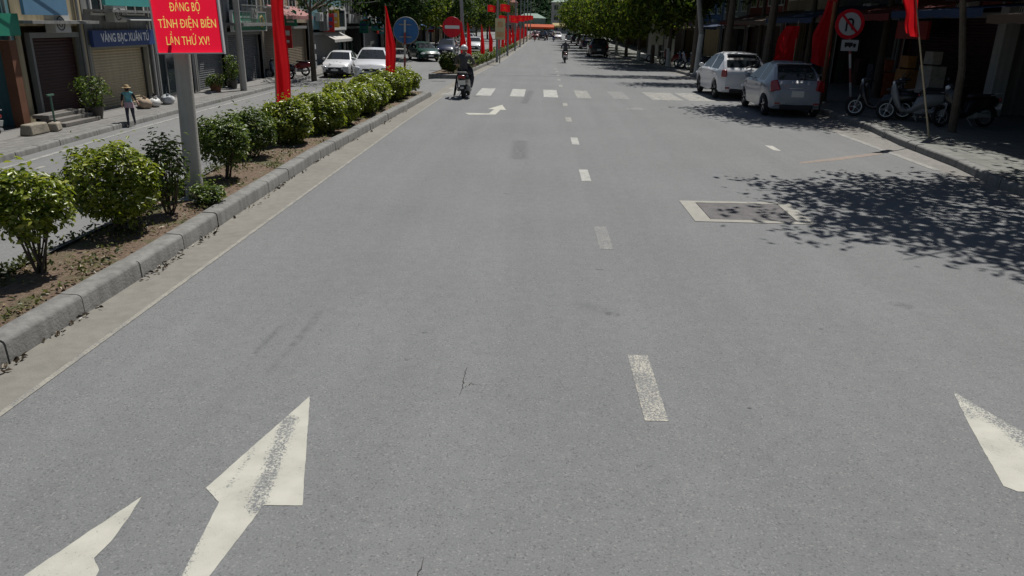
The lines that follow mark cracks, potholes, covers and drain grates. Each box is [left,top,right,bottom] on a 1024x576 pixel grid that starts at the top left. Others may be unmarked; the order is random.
manhole cover [679,200,815,224]
